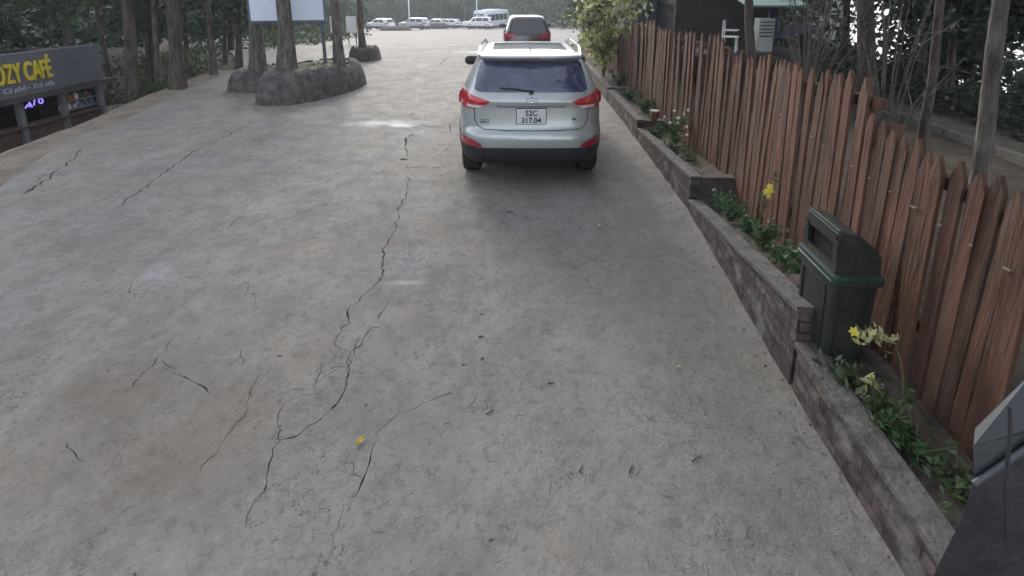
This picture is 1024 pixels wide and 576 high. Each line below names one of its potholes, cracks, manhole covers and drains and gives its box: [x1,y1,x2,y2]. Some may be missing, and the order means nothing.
crack [200,113,451,528]
crack [23,148,82,195]
crack [338,392,476,526]
crack [125,337,209,393]
crack [114,128,241,210]
